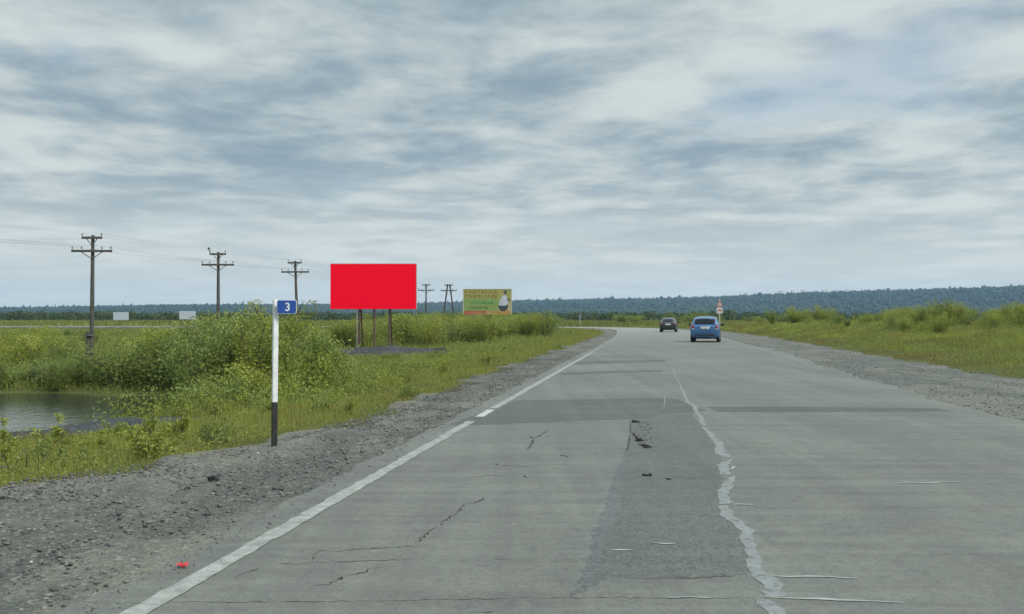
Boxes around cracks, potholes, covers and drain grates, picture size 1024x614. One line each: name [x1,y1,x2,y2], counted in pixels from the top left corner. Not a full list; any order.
crack [134,498,729,613]
crack [466,430,568,478]
